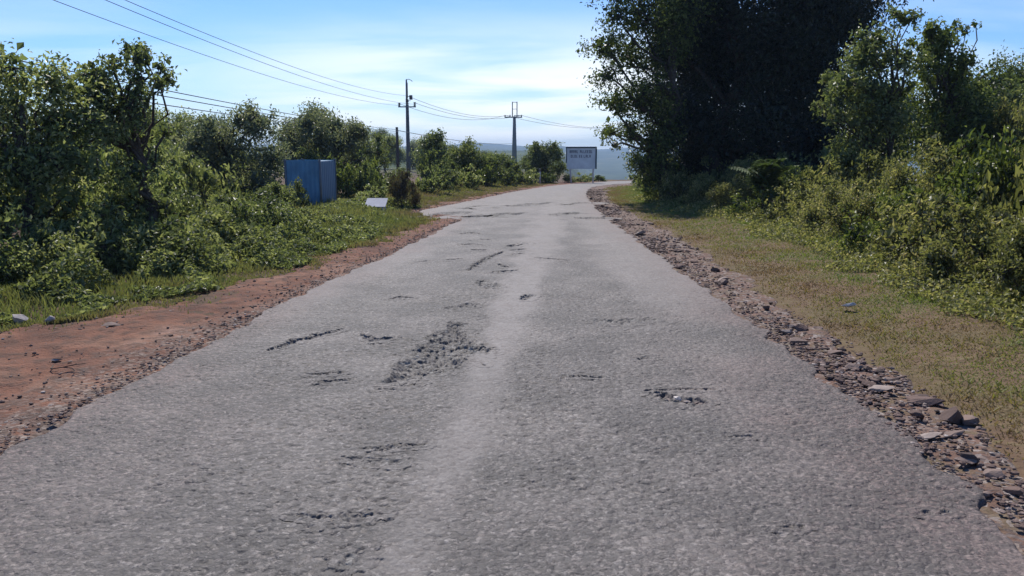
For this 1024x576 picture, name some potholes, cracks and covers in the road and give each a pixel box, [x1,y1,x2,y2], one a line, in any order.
pothole [640,390,722,411]
pothole [368,320,508,389]
pothole [334,449,418,471]
pothole [511,293,542,302]
